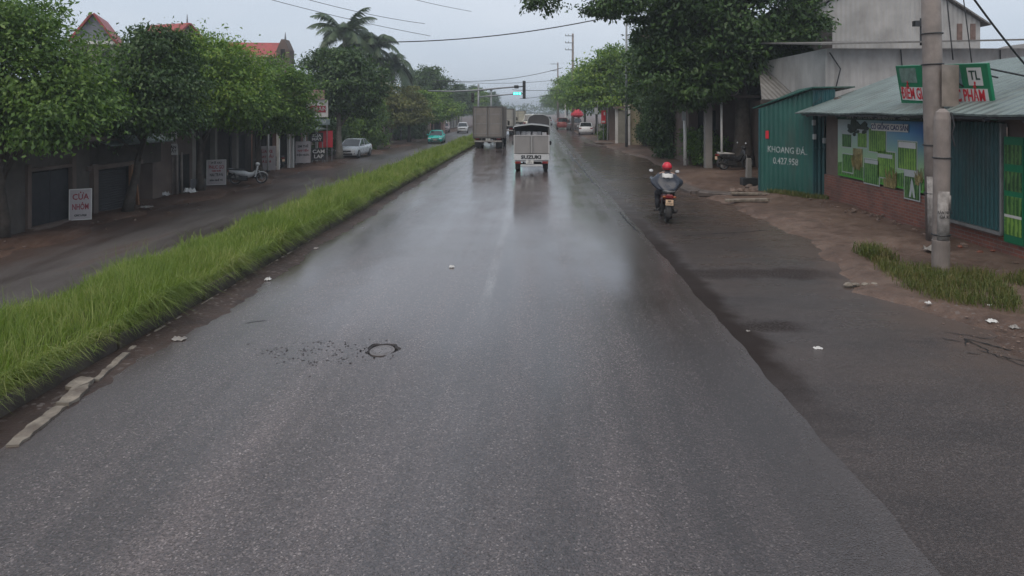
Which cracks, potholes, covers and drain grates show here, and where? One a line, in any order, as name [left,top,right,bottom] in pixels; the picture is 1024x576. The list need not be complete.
crack [944,332,1023,365]
